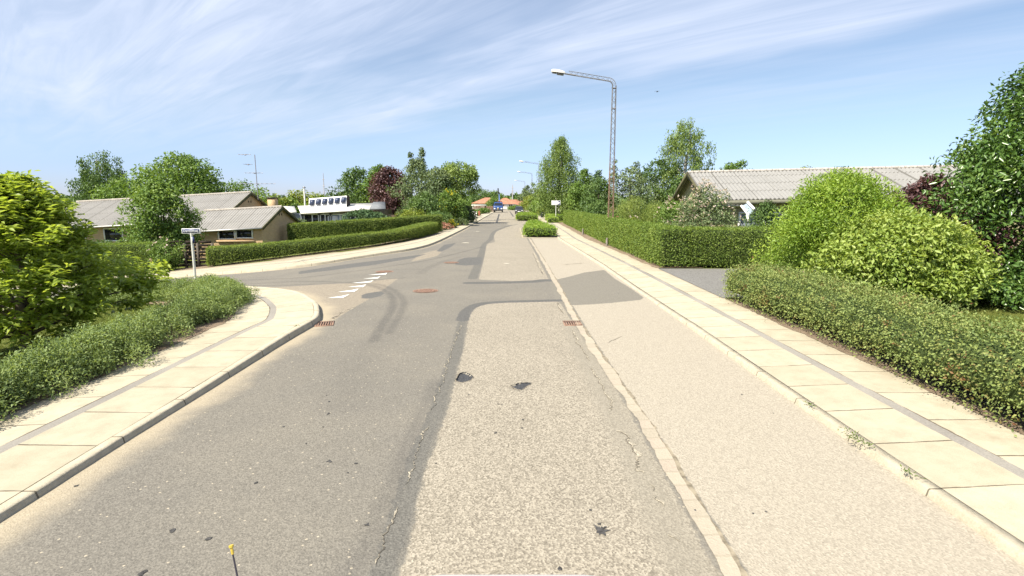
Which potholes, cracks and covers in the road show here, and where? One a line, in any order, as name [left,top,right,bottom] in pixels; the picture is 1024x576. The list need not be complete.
pothole [509,382,532,391]
crack [573,331,614,410]
crack [616,430,665,506]
crack [375,507,398,563]
crack [405,427,429,485]
pothole [455,372,474,383]
crack [431,325,462,409]
